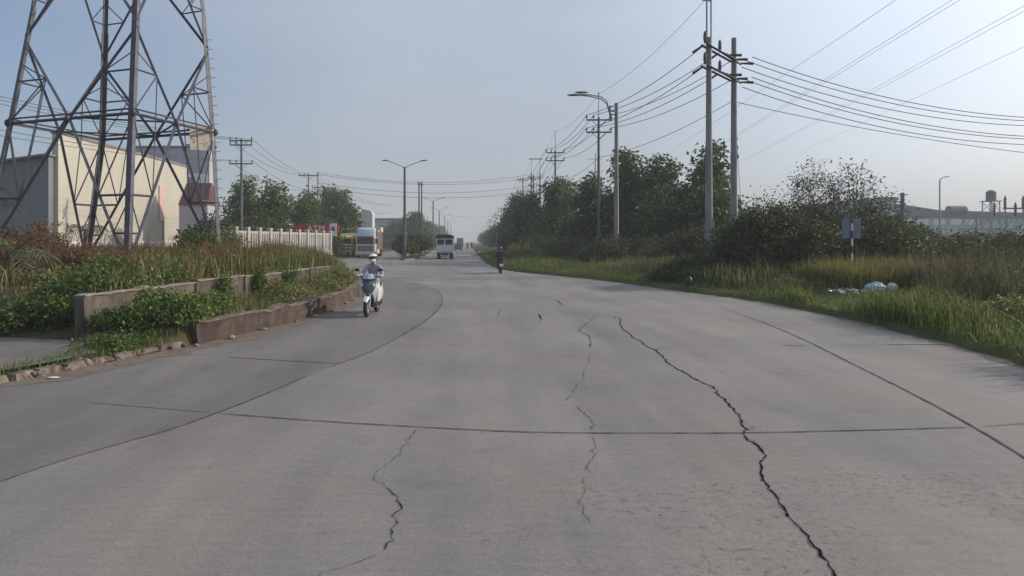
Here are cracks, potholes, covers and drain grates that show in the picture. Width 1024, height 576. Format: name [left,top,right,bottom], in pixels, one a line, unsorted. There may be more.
crack [566,318,596,521]
crack [319,430,416,576]
crack [614,317,837,576]
